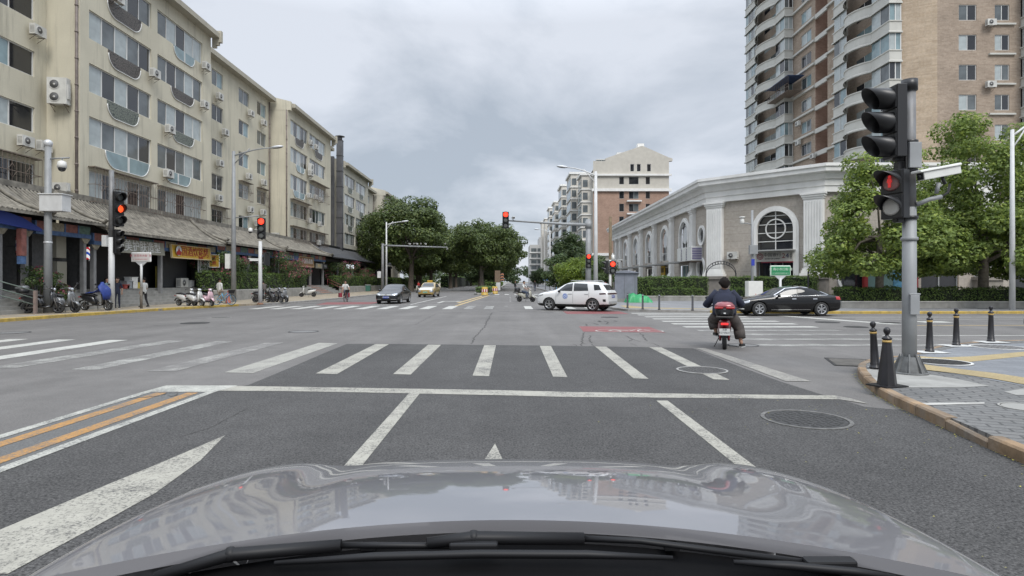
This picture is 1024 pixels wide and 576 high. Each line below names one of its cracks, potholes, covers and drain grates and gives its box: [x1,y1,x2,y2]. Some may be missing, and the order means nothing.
manhole cover [997,402,1024,411]
crack [574,320,659,346]
manhole cover [676,366,728,374]
manhole cover [760,409,854,430]
manhole cover [921,358,974,366]
